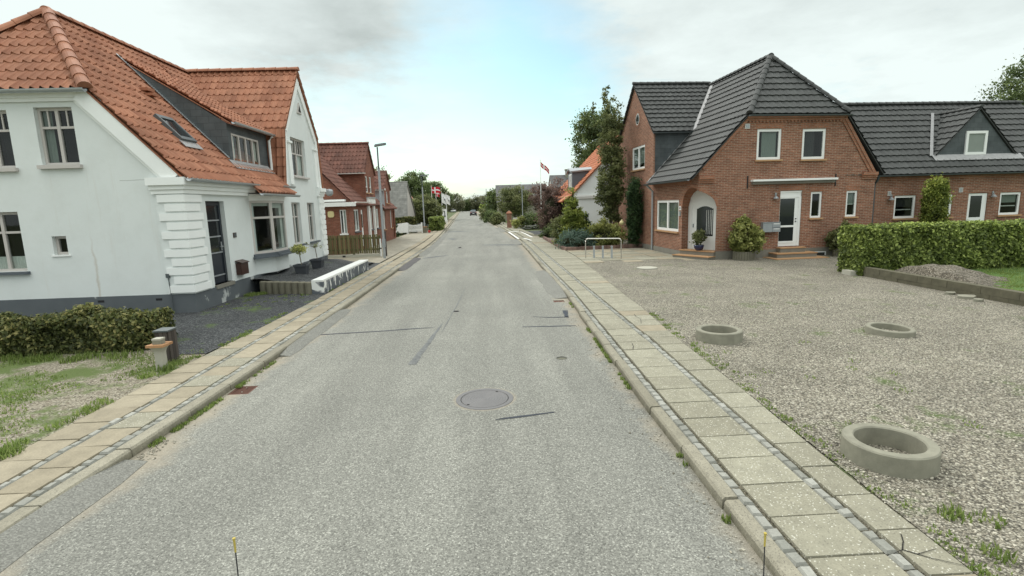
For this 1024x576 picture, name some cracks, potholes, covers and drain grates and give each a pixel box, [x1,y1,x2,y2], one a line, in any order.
crack [893,534,966,566]
drain grate [228,386,258,395]
manhole cover [456,388,513,410]
